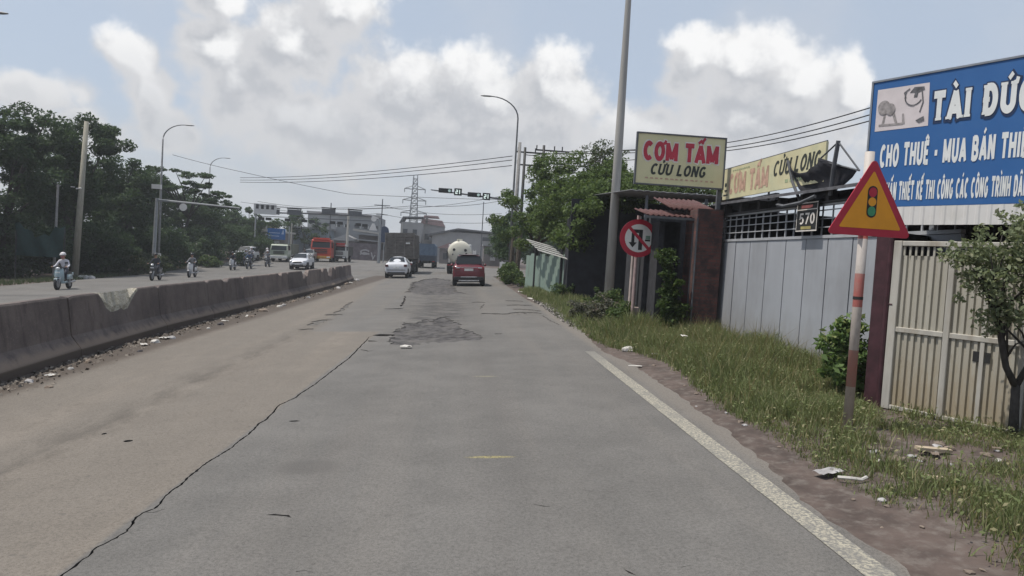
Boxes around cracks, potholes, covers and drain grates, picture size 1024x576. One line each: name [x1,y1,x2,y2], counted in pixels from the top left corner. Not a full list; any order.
crack [301,302,352,330]
crack [474,302,559,325]
crack [60,334,394,576]
